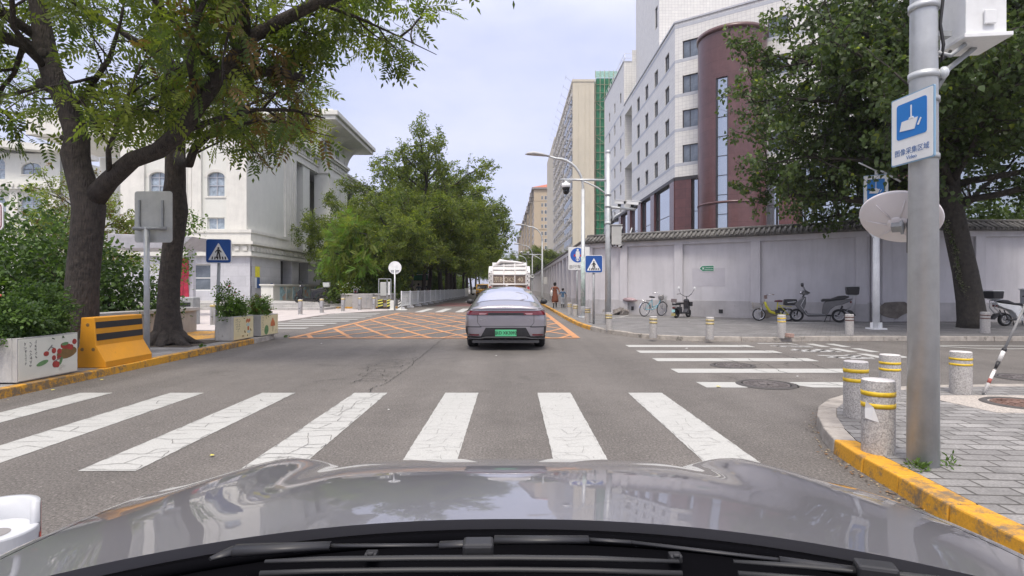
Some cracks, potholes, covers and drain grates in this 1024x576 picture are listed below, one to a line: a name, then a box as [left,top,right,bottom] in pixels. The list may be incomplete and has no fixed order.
crack [246,330,455,467]
manhole cover [735,379,800,390]
manhole cover [940,395,1024,413]
